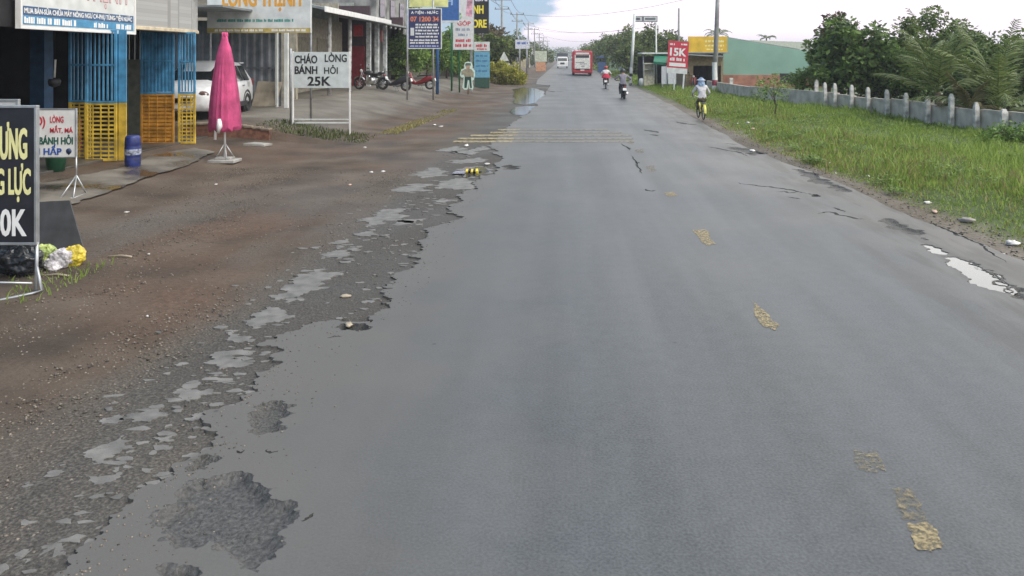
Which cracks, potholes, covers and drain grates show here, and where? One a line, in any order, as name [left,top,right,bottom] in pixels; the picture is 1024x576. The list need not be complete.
crack [621,130,659,191]
pothole [336,323,372,331]
pothole [247,400,297,435]
crack [739,183,808,199]
pothole [149,471,300,573]
